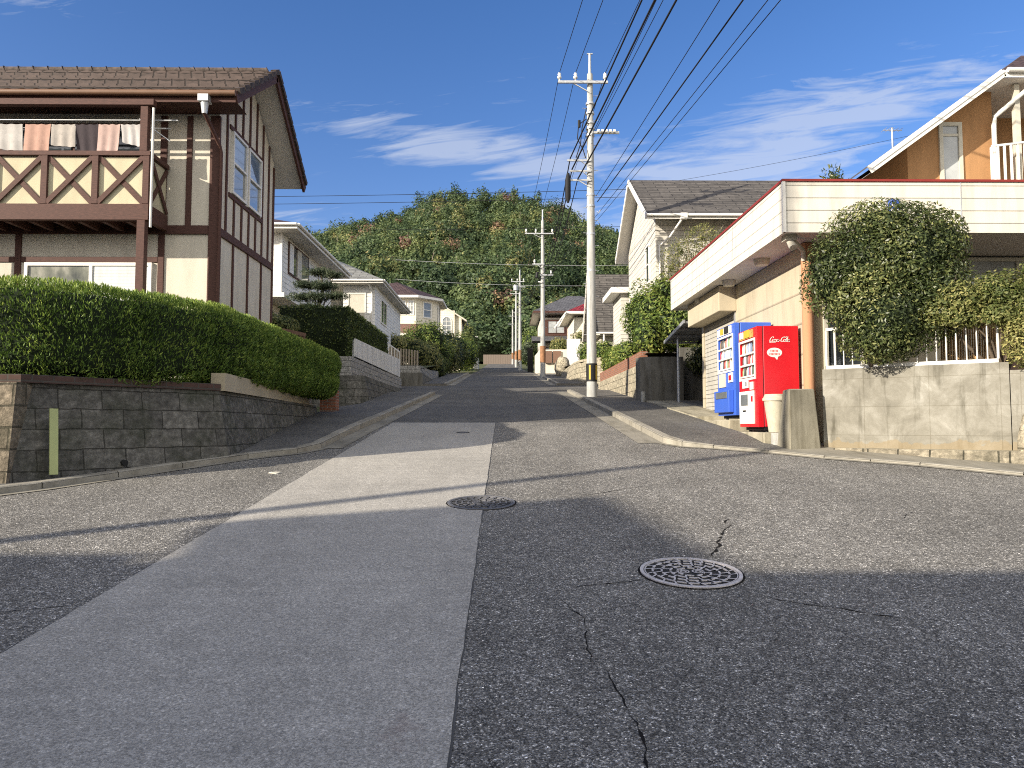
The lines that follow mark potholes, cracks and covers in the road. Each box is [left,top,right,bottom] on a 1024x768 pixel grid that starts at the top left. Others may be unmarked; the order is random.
crack [565,579,648,768]
crack [711,519,730,558]
manhole cover [446,495,516,510]
manhole cover [638,557,745,589]
